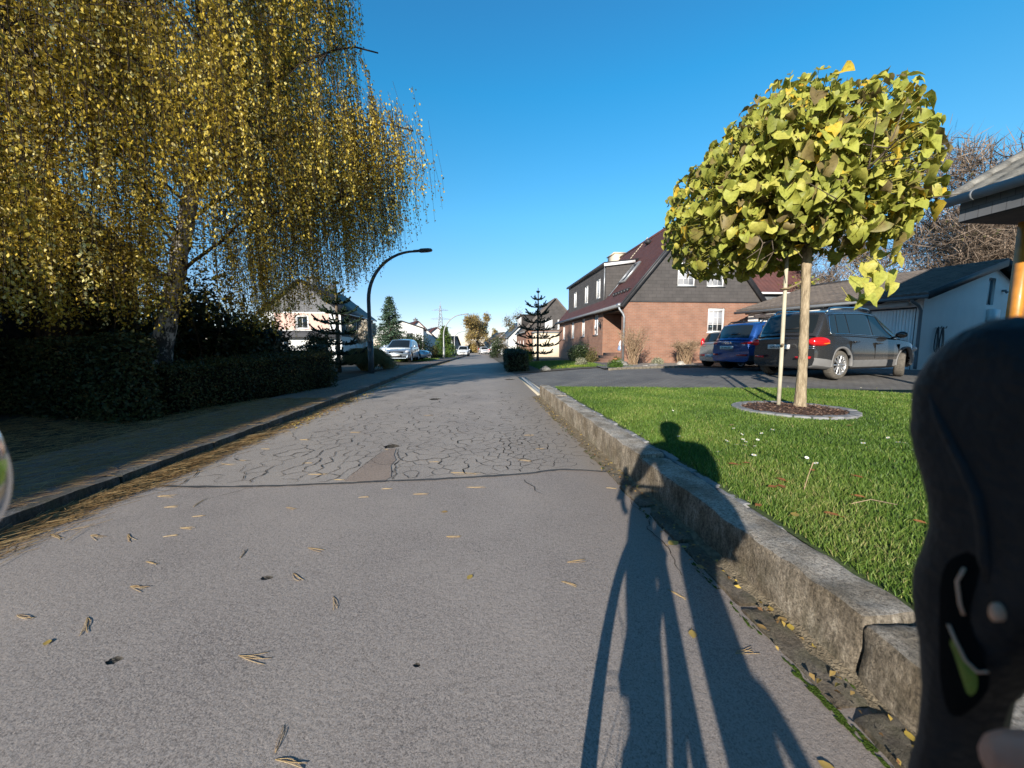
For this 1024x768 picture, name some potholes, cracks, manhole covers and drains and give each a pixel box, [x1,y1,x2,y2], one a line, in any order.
crack [158,389,593,491]
